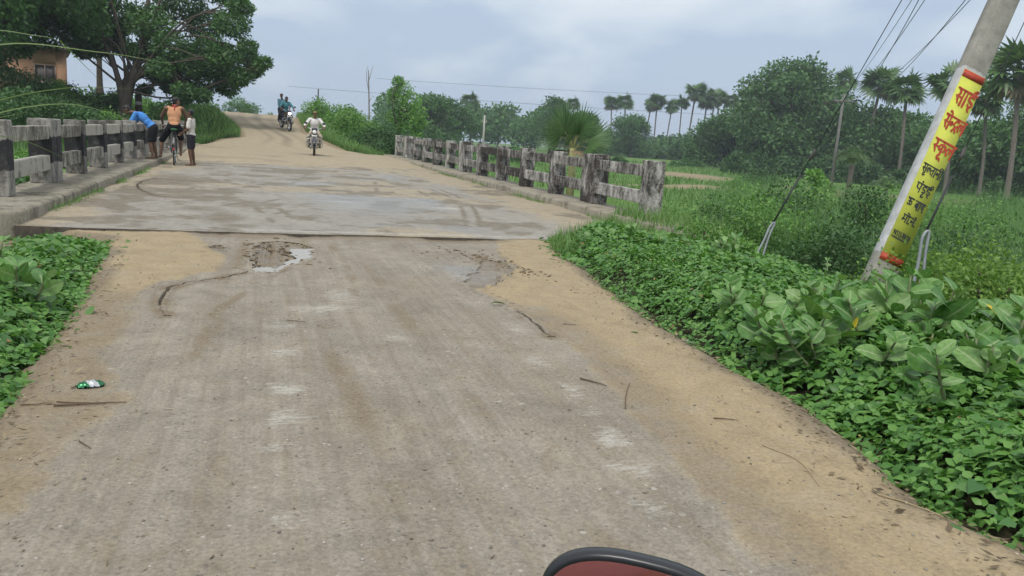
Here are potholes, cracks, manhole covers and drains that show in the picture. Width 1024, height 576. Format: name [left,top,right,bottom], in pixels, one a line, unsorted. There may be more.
pothole [241,240,320,273]
crack [513,309,555,337]
crack [152,267,253,316]
pothole [456,258,522,291]
crack [132,178,207,198]
